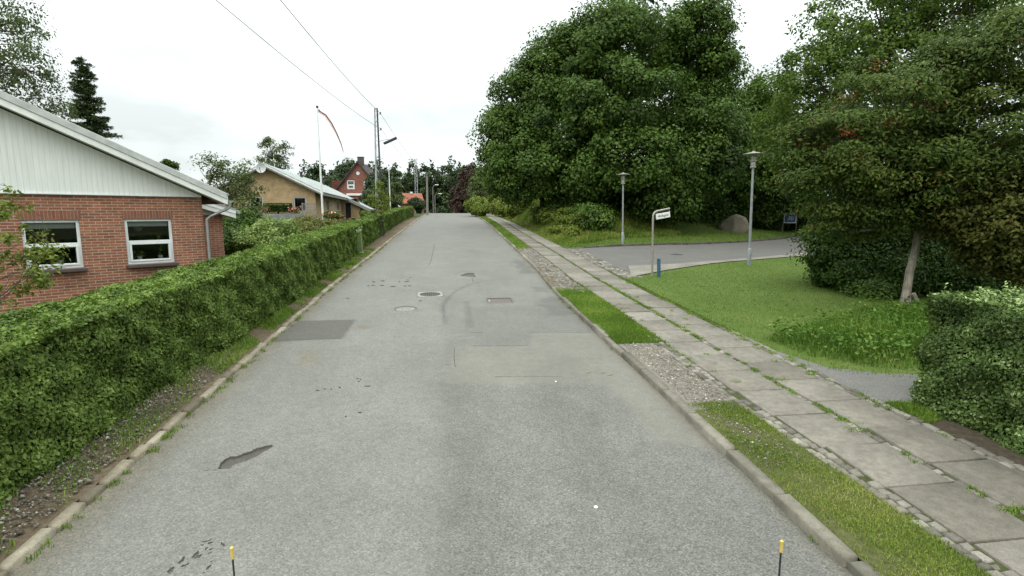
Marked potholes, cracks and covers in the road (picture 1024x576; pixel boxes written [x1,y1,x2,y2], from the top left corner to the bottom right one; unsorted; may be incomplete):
pothole [218,445,273,469]
